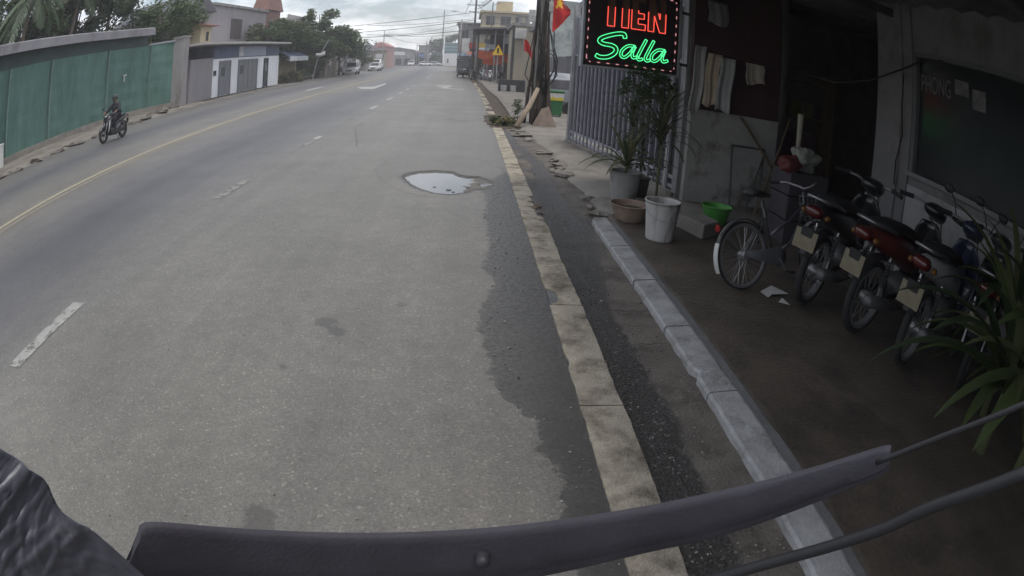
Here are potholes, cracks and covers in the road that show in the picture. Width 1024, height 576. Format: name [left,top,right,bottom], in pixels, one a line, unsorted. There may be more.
pothole [402,170,495,194]
